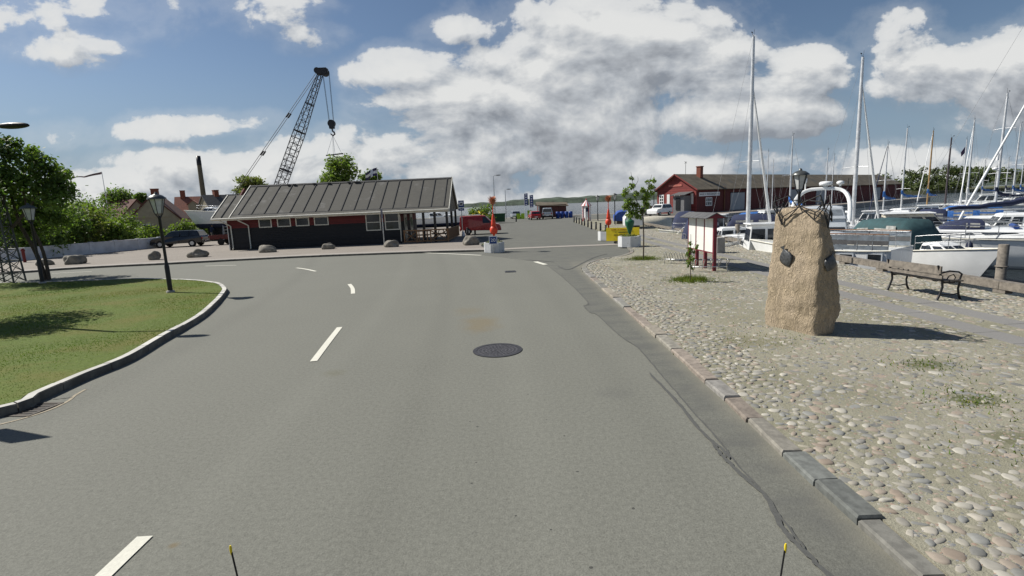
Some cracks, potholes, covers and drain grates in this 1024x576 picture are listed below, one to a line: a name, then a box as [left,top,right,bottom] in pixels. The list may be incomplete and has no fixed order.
drain grate [1,389,86,424]
manhole cover [473,343,522,358]
